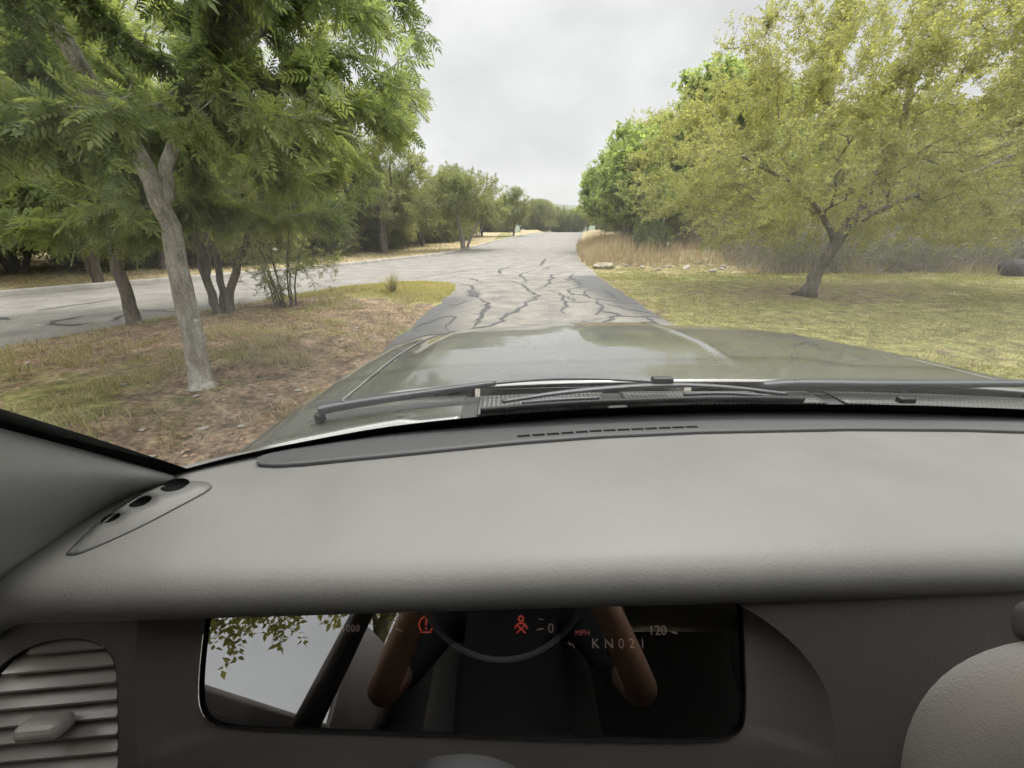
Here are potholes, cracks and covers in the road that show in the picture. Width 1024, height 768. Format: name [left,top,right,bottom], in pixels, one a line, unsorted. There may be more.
crack [37,300,124,325]
crack [387,259,661,346]
